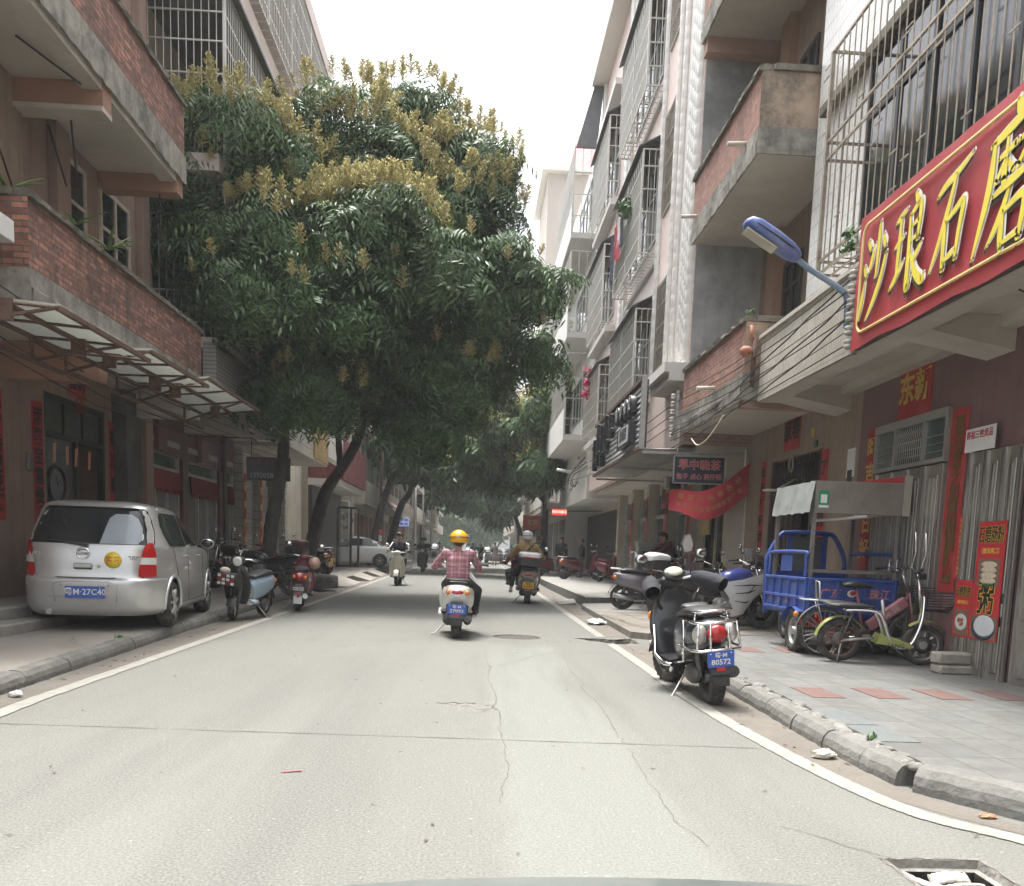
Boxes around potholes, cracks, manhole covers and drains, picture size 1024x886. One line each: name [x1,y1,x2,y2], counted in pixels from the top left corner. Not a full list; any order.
drain grate [878,857,1024,886]
crack [484,635,708,846]
